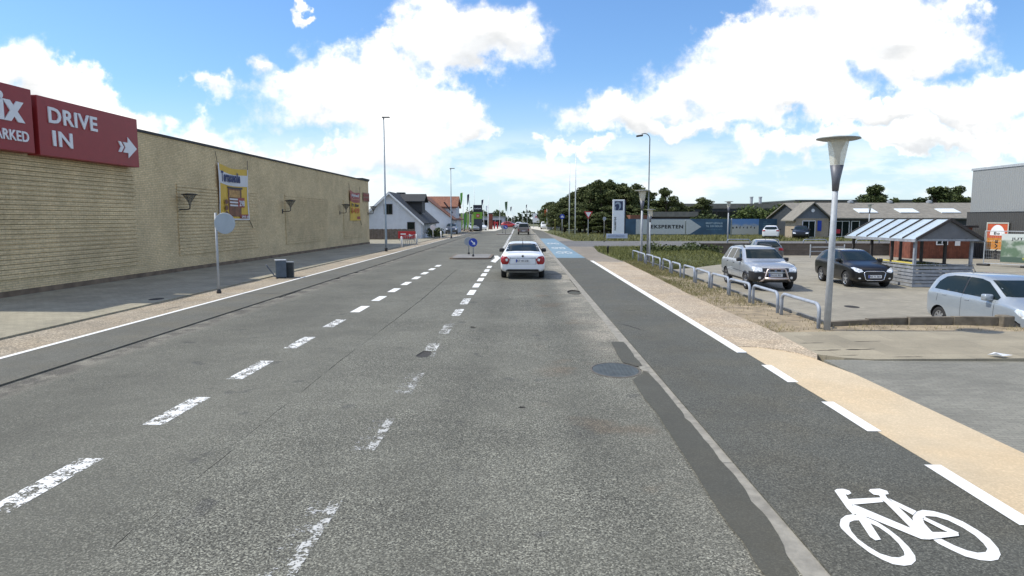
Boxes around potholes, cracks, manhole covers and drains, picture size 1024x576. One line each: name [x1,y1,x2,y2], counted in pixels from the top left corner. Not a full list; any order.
manhole cover [590,362,641,378]
